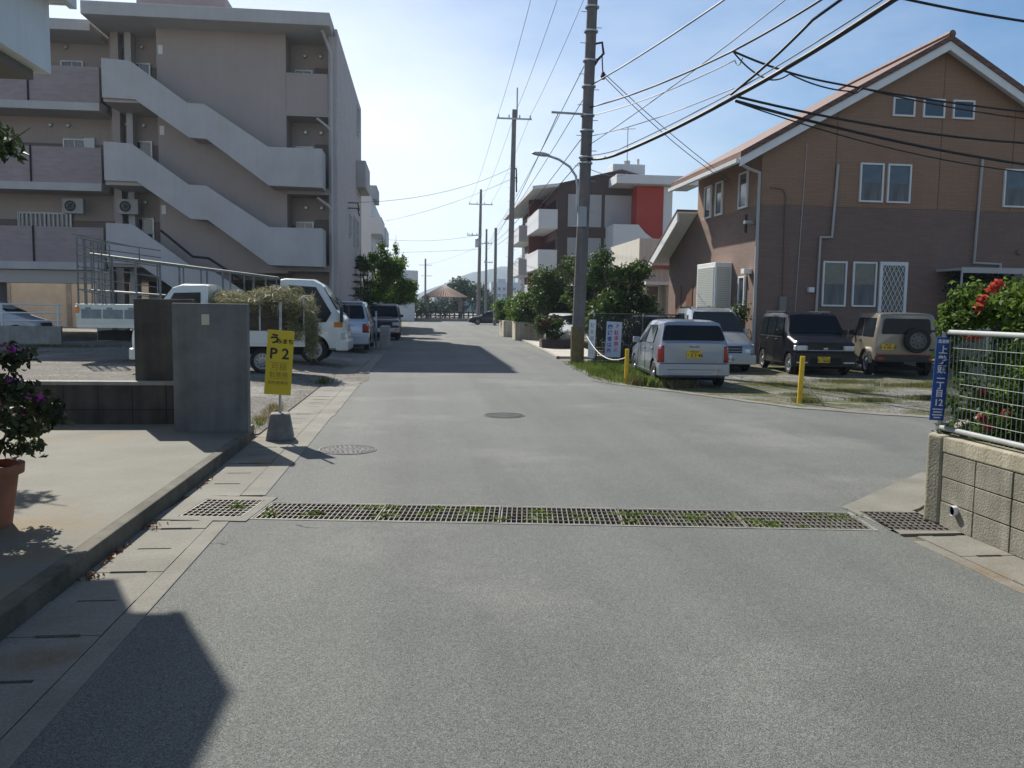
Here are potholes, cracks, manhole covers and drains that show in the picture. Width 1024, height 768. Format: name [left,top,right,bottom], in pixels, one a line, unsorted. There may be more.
drain grate [377,505,501,523]
drain grate [500,507,623,525]
drain grate [180,499,264,517]
manhole cover [318,445,377,455]
drain grate [617,509,747,527]
drain grate [255,503,386,521]
drain grate [861,511,953,531]
